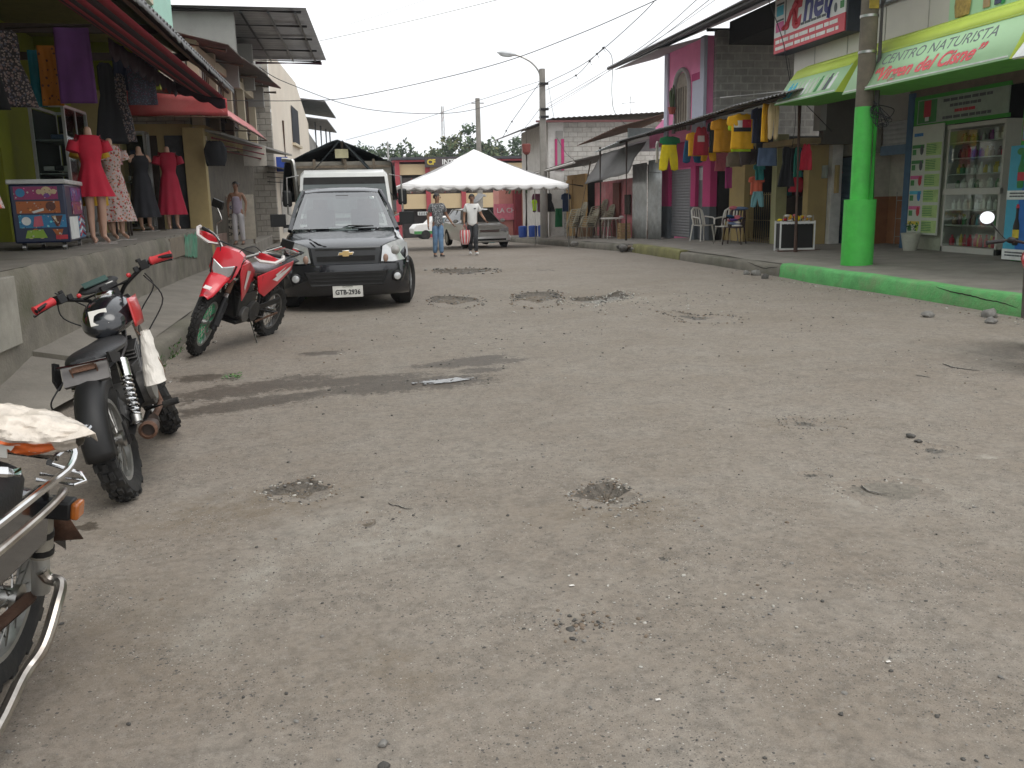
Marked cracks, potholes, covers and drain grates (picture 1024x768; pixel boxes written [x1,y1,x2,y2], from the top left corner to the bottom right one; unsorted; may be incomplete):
pothole [253,475,341,505]
pothole [509,289,566,309]
pothole [424,266,502,275]
pothole [776,414,847,431]
pothole [426,294,488,309]
pothole [648,309,750,325]
pothole [564,478,647,511]
pothole [559,290,634,308]
